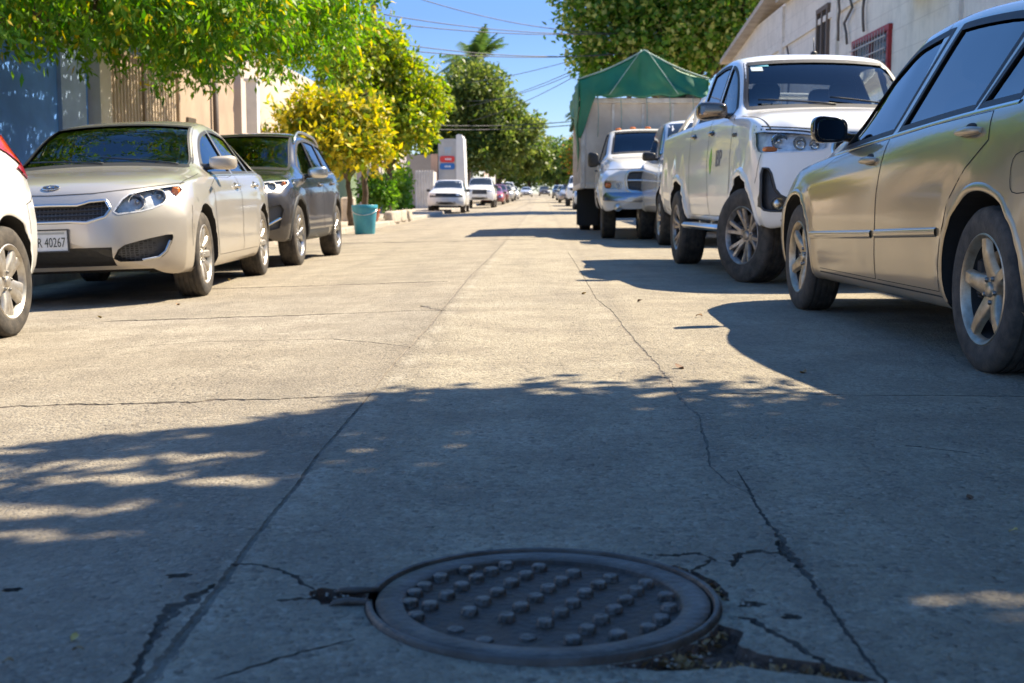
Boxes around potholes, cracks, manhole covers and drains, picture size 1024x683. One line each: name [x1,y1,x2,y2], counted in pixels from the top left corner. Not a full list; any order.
crack [231,563,317,602]
crack [214,639,355,679]
manhole cover [328,548,721,667]
crack [570,256,888,683]
